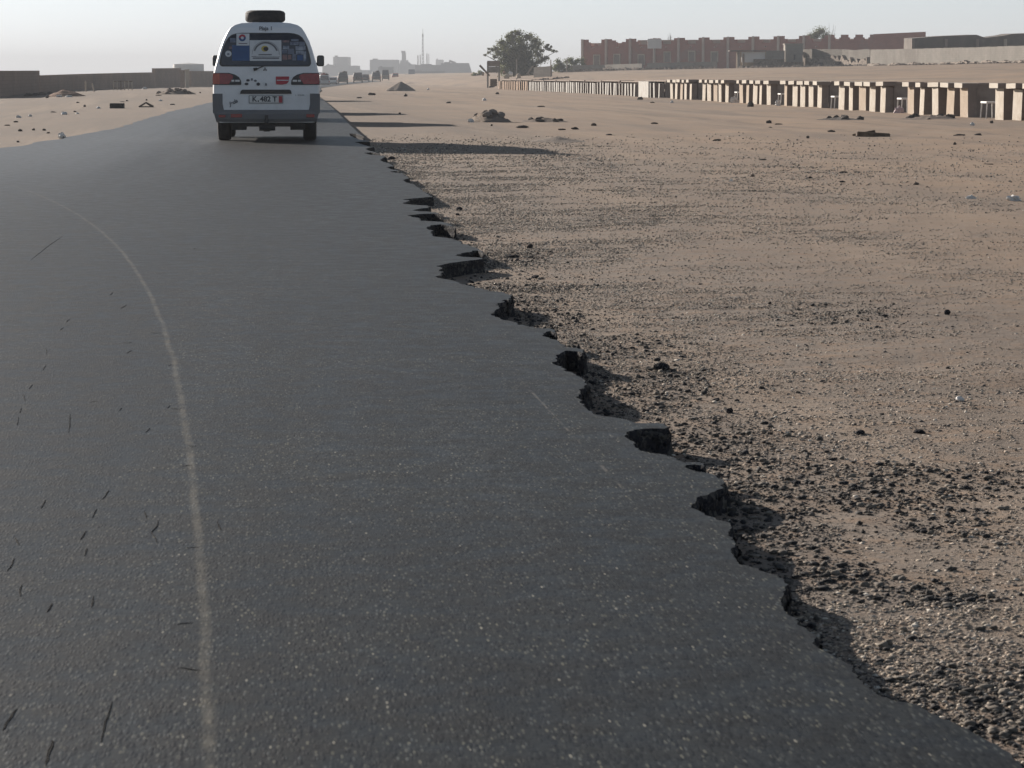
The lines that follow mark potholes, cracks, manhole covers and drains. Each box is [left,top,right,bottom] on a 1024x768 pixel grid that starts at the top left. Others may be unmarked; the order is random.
pothole [629,430,690,459]
pothole [410,199,439,212]
crack [101,702,112,742]
pothole [429,227,473,245]
pothole [559,355,609,384]
crack [45,740,54,765]
pothole [582,389,623,419]
pothole [416,216,458,227]
pothole [700,491,755,538]
pothole [443,262,516,292]
